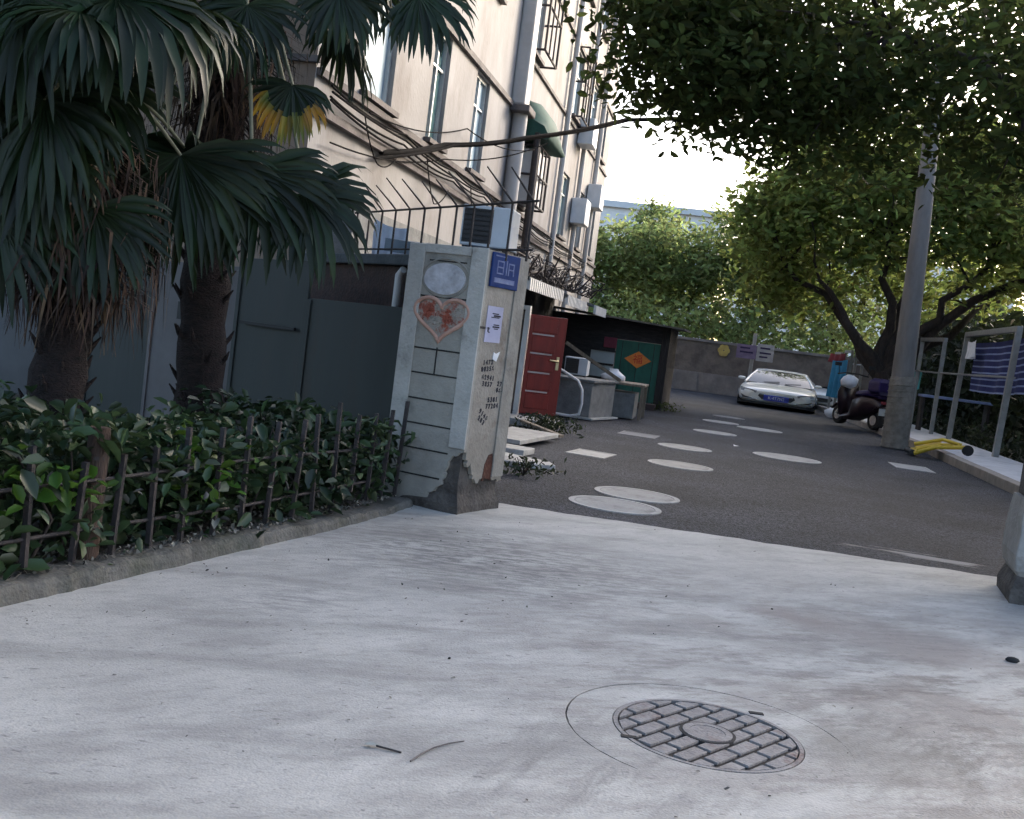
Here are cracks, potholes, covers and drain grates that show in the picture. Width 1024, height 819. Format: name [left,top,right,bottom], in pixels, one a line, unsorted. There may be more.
manhole cover [565,684,856,796]
